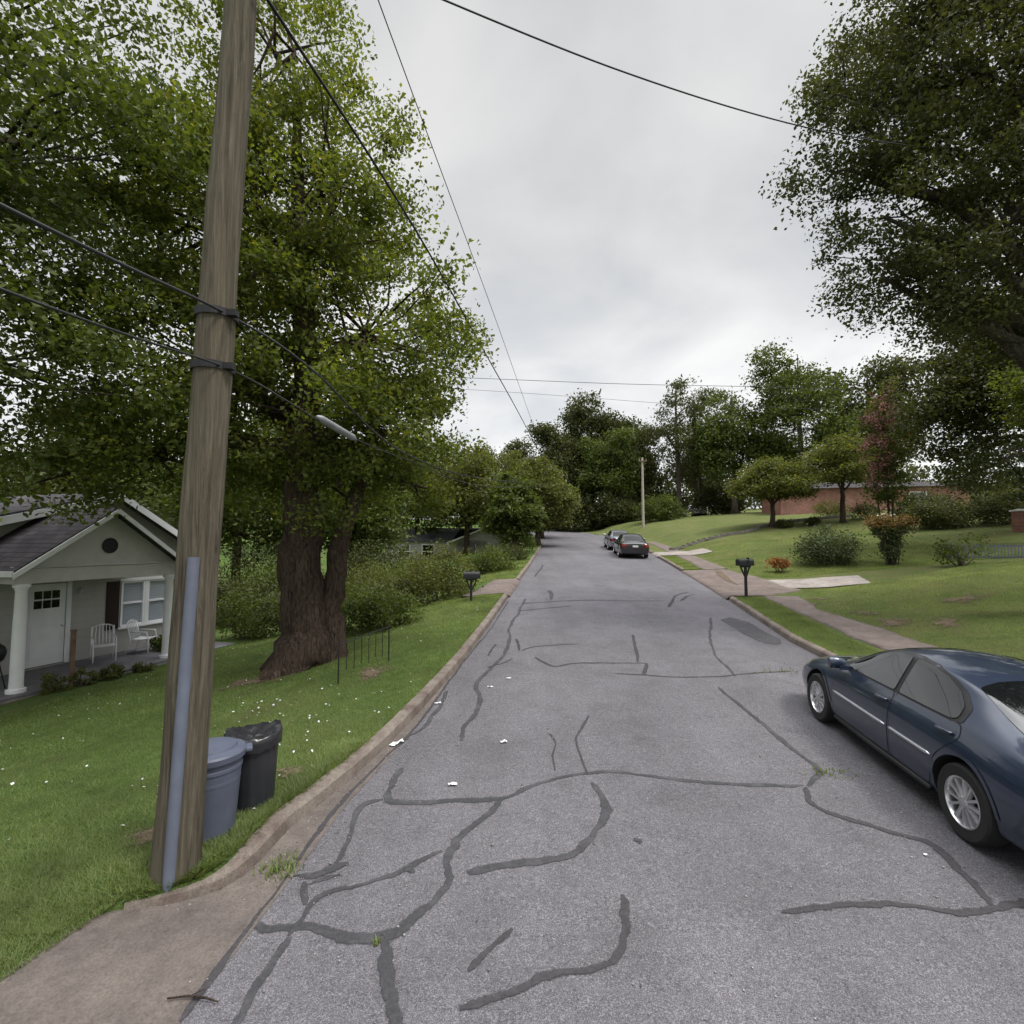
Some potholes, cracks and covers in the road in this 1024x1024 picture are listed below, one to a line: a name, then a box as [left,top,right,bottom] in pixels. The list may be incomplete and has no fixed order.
crack [782,787,1024,917]
crack [459,894,631,1011]
crack [411,565,790,741]
crack [575,715,589,774]
crack [231,936,293,1024]
